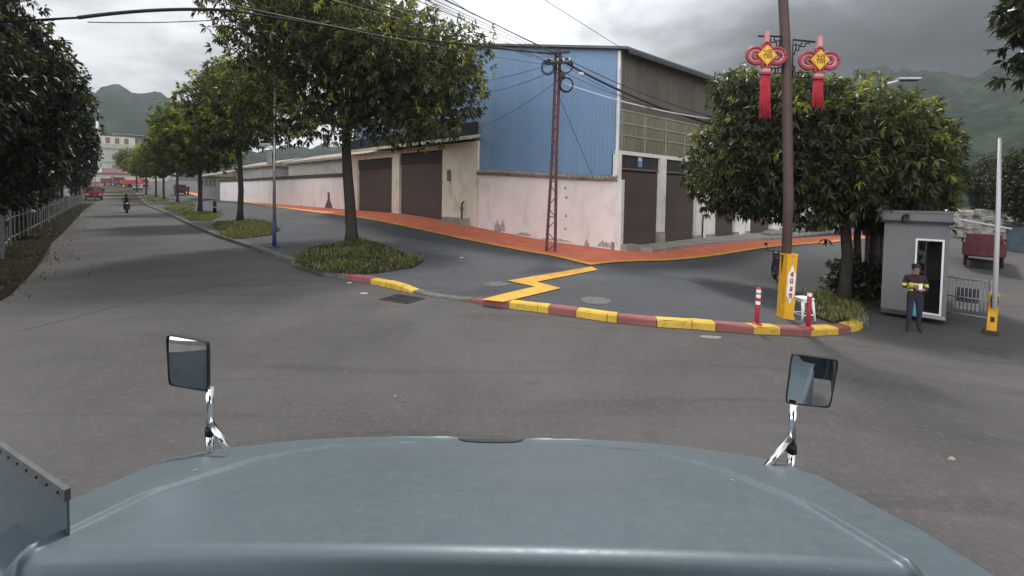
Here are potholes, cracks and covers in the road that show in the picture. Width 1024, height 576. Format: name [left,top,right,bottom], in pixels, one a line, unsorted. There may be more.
manhole cover [577,296,615,305]
drain grate [380,294,425,304]
